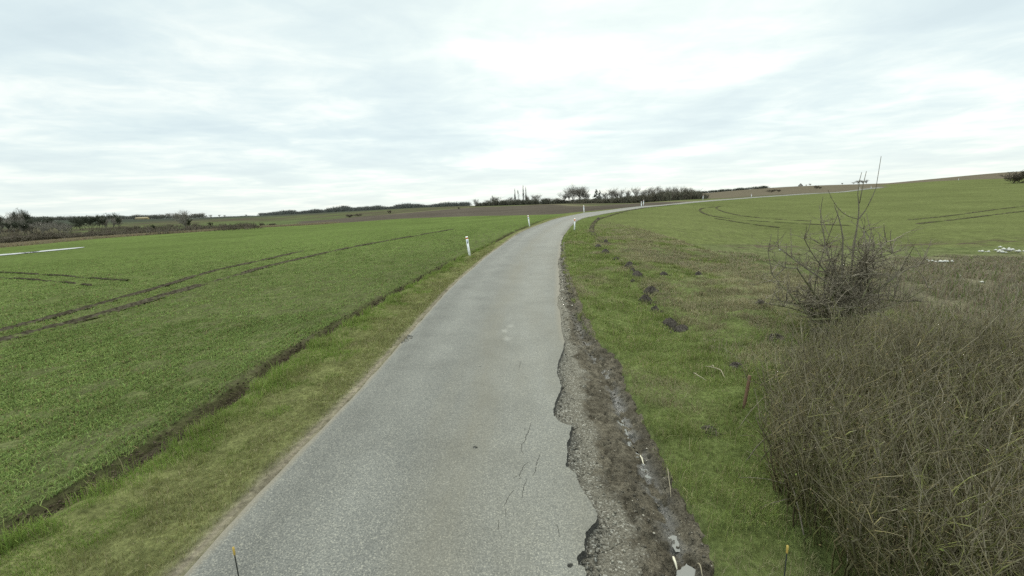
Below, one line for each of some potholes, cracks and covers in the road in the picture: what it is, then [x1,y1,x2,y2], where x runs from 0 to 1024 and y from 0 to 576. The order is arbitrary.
pothole [557,349,575,389]
pothole [553,387,592,429]
pothole [566,427,601,477]
pothole [584,516,623,557]
crack [498,423,540,529]
pothole [577,551,599,576]
